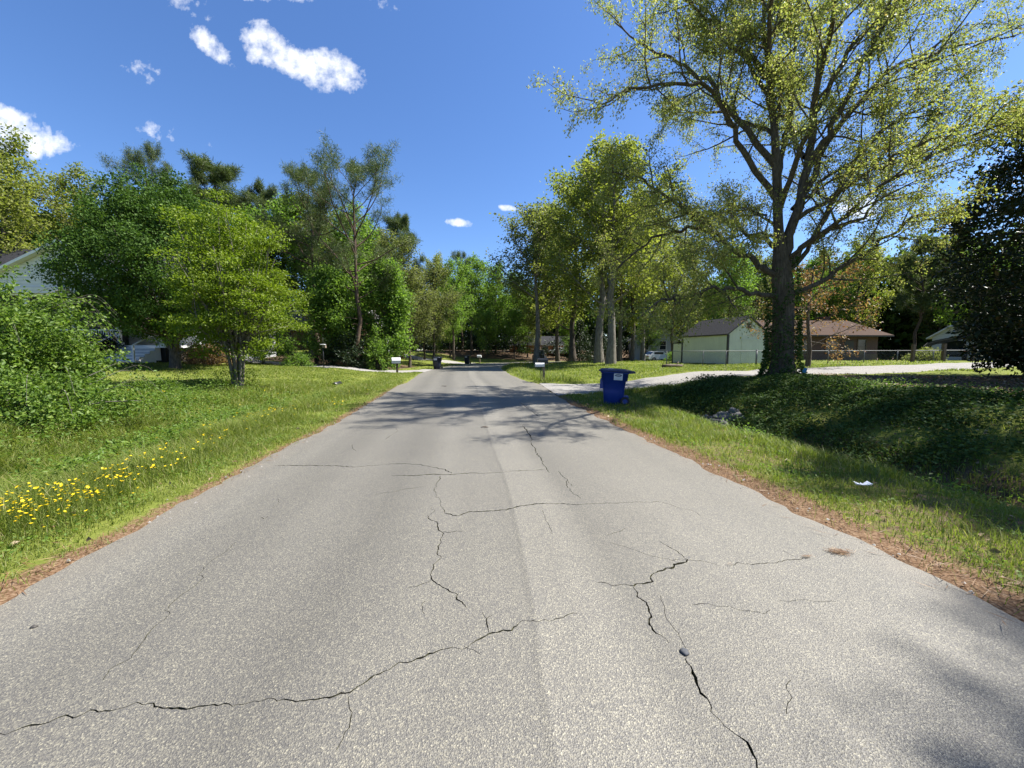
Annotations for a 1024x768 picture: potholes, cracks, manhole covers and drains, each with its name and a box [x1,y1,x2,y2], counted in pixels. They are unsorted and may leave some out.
crack [598,542,758,768]
crack [0,403,699,750]
